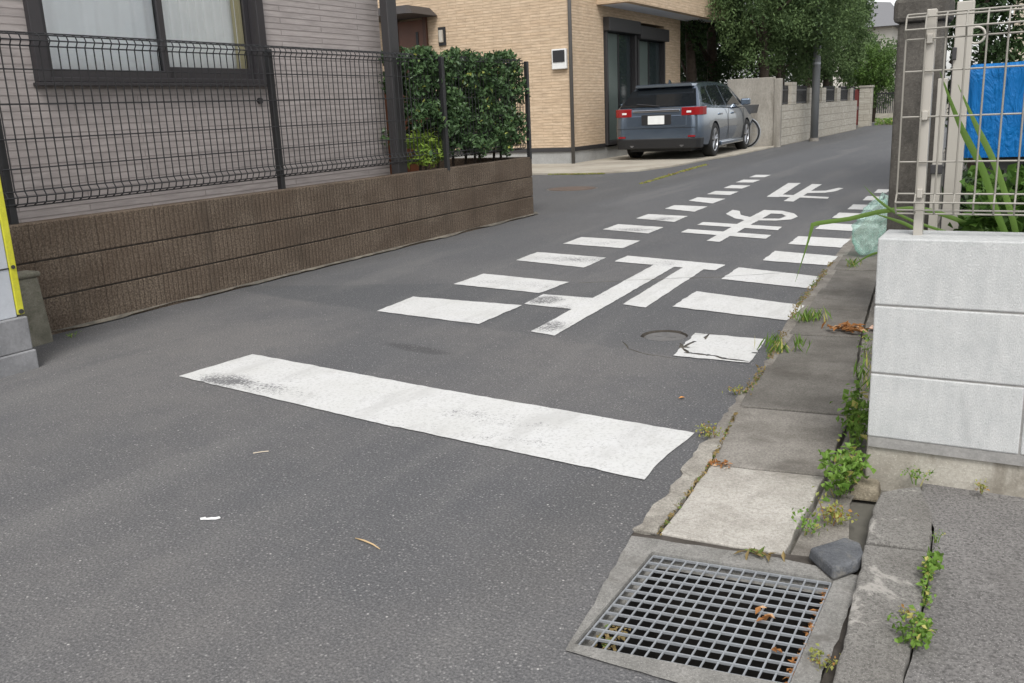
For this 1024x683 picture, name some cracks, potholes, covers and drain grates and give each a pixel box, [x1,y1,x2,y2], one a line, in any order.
crack [623,333,749,363]
drain grate [566,536,858,683]
manhole cover [640,330,688,341]
